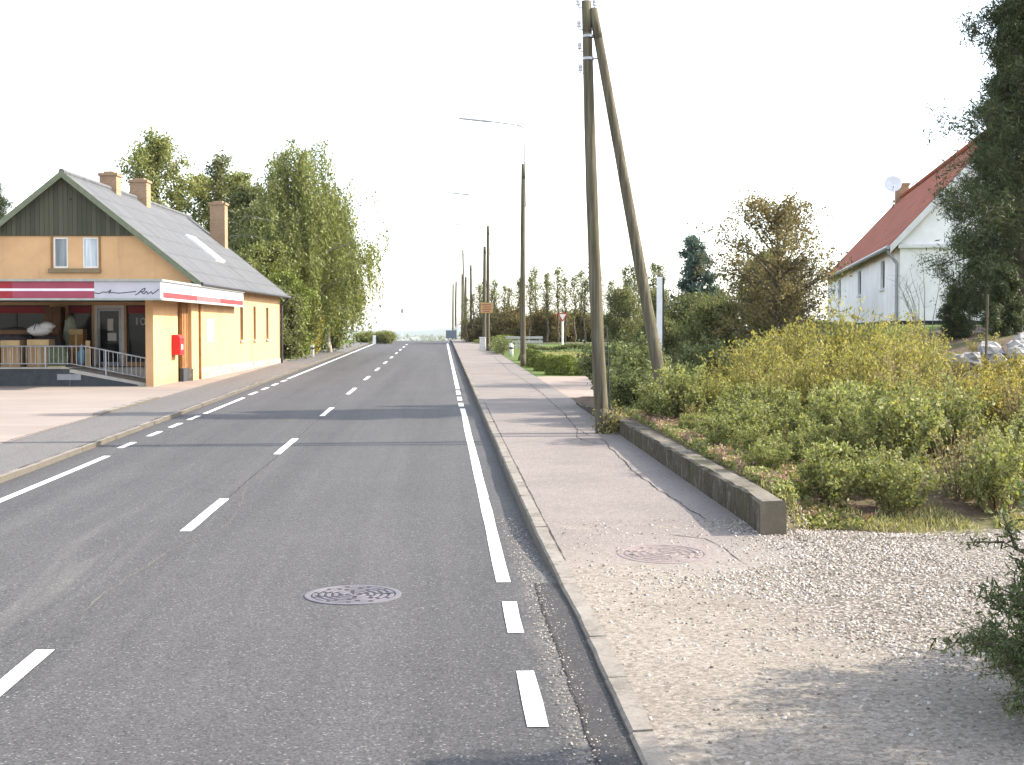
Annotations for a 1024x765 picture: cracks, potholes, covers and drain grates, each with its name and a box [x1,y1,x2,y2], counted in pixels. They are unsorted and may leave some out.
crack [604,440,706,519]
crack [80,461,274,614]
manhole cover [617,544,710,564]
manhole cover [304,585,402,605]
